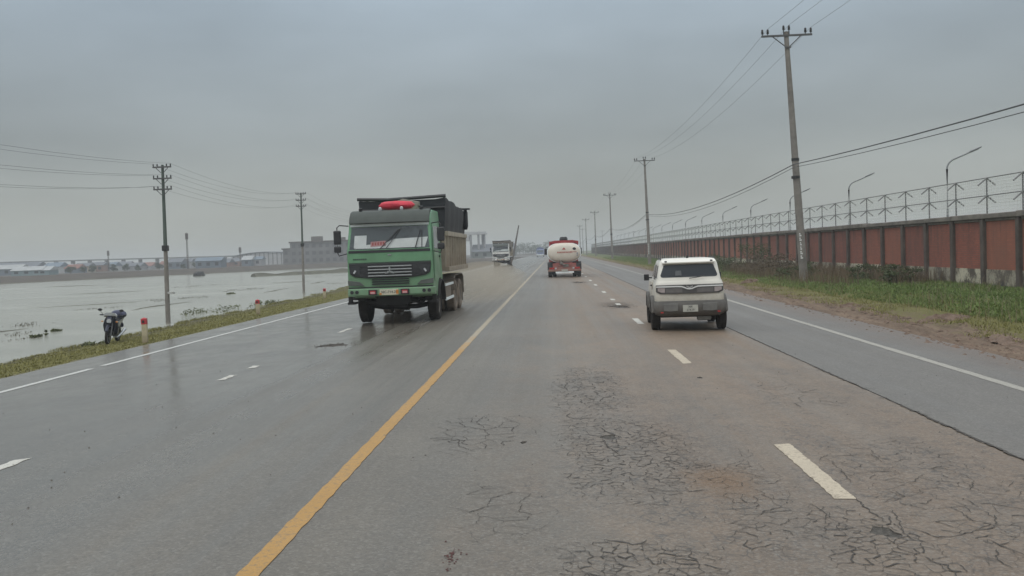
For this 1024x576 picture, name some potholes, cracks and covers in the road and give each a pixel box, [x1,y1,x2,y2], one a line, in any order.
crack [730,375,831,407]
crack [802,435,1024,576]
pothole [870,526,903,538]
crack [546,368,716,512]
crack [444,484,558,545]
crack [430,414,543,459]
crack [541,539,731,576]
